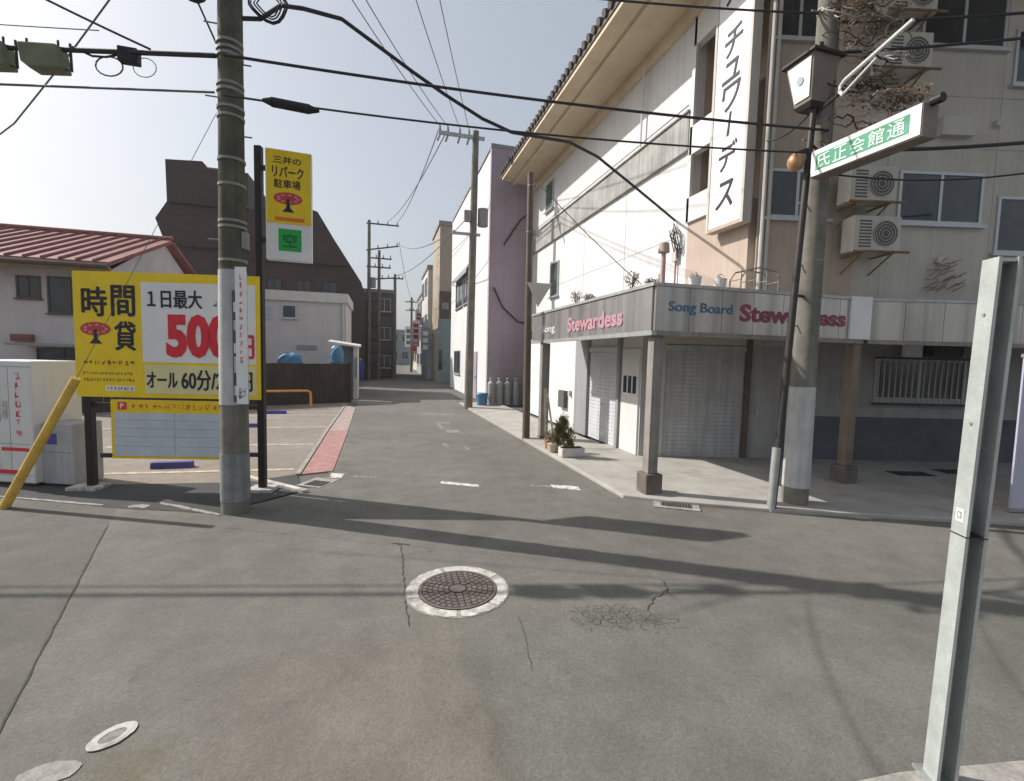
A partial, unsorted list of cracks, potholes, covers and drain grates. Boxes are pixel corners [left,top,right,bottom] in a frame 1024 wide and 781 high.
drain grate [653,501,701,512]
crack [395,543,410,625]
utility cover [85,721,138,751]
manhole cover [405,566,509,619]
crack [565,579,687,631]
drain grate [298,477,339,488]
